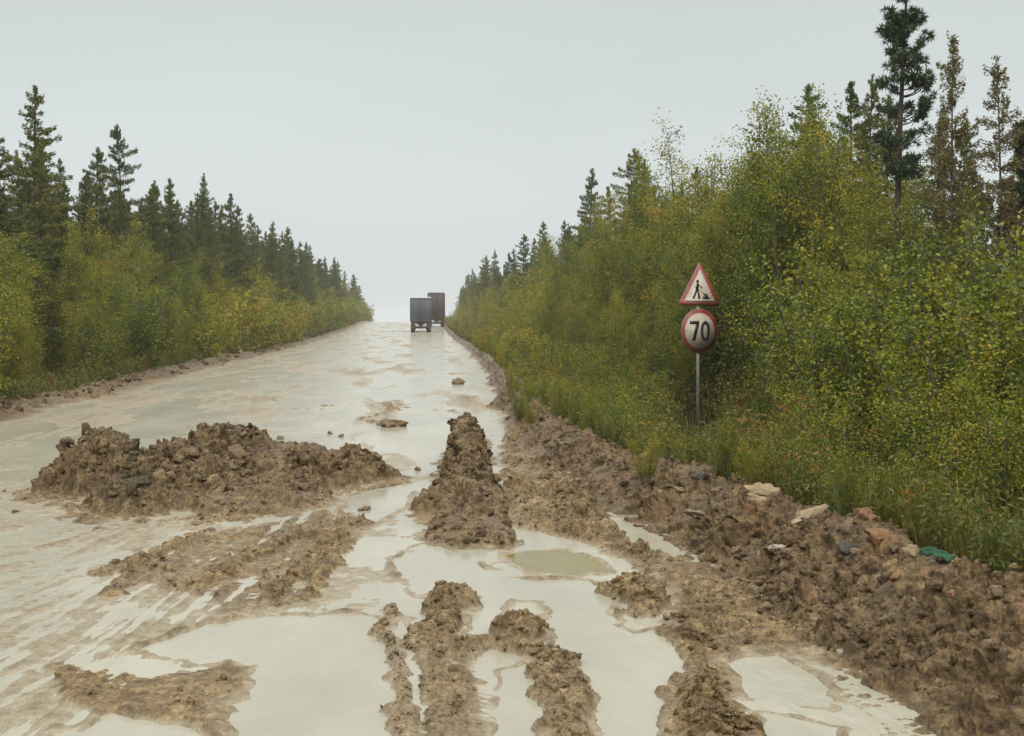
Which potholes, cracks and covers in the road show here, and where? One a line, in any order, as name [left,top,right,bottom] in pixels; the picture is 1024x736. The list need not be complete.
pothole [387,542,695,736]
